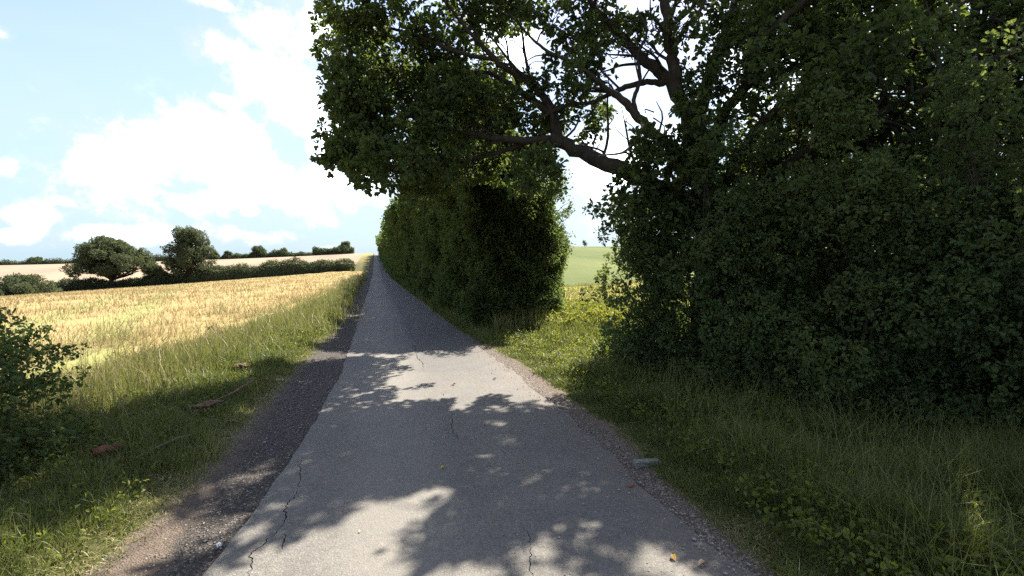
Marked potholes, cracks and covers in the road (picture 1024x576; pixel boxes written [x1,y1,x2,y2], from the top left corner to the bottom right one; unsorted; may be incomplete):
crack [247,463,301,576]
